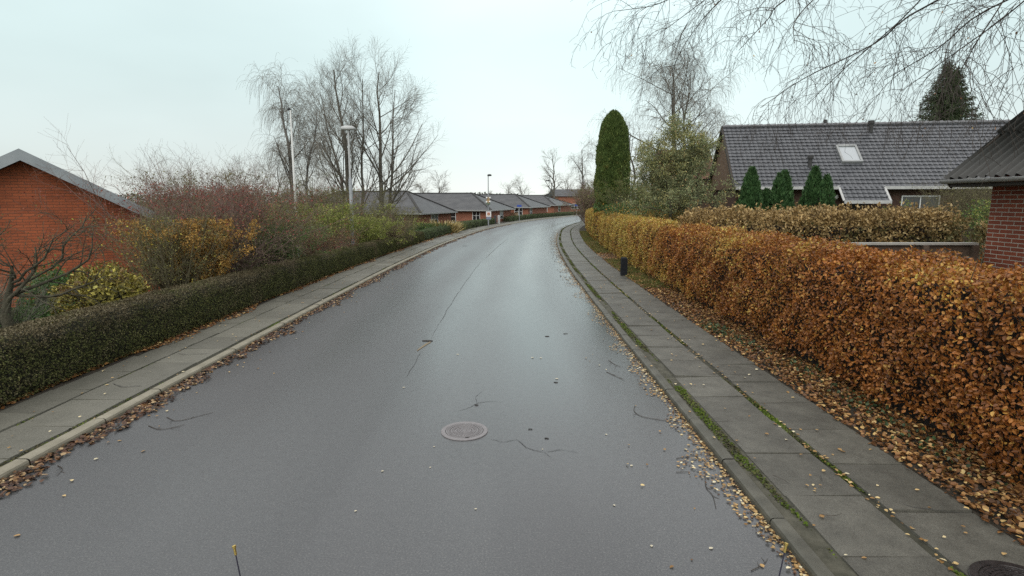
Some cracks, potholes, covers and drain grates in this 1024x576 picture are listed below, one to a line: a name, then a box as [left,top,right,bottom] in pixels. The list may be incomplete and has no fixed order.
manhole cover [441,421,488,441]
manhole cover [968,560,1024,576]
